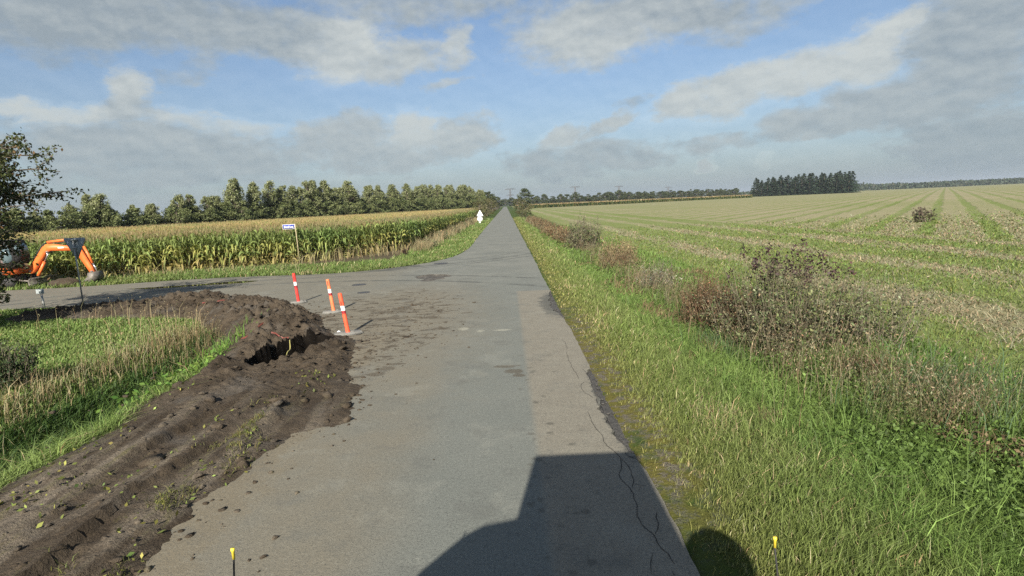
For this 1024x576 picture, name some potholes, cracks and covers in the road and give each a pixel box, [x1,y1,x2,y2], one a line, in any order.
crack [565,343,674,574]
